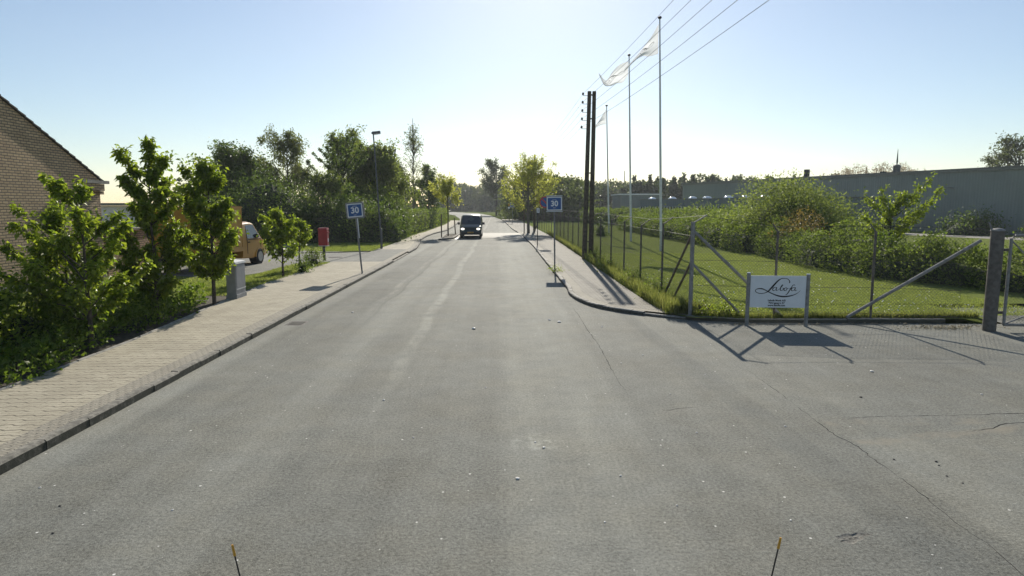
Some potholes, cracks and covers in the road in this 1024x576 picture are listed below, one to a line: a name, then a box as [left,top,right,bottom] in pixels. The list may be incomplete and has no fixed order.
pothole [835,532,872,544]
crack [834,413,1024,432]
